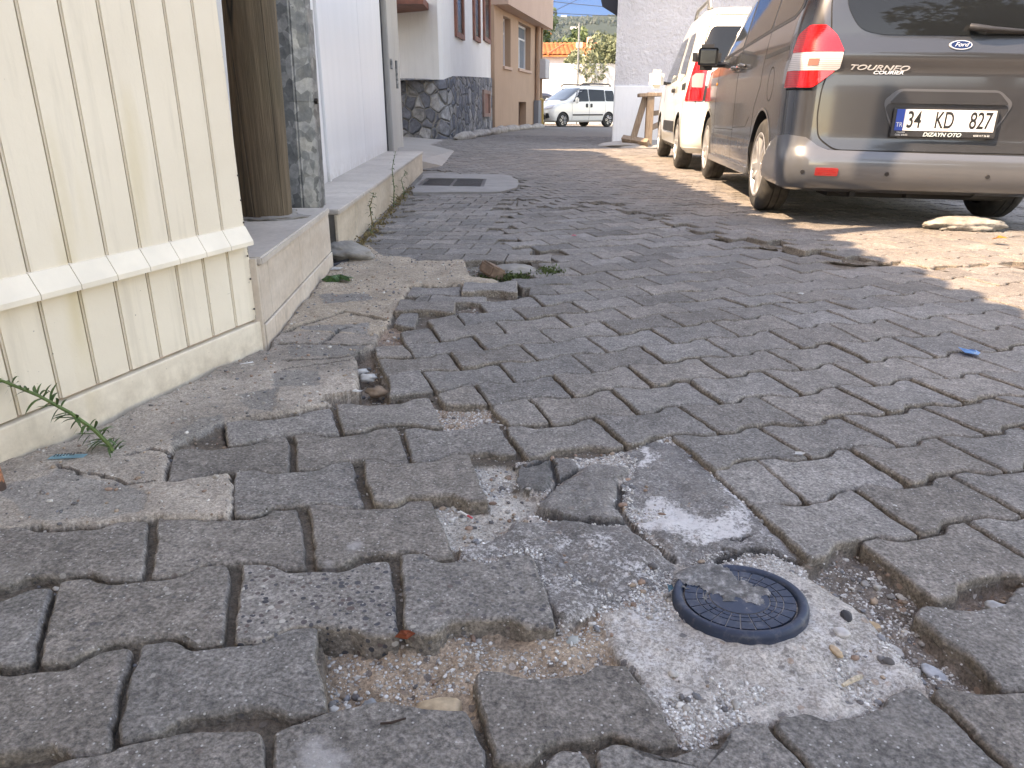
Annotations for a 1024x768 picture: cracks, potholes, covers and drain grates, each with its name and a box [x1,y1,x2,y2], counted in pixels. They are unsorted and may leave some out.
drain grate [412,172,520,196]
manhole cover [672,563,810,645]
crack [57,446,173,485]
crack [277,311,388,369]
pothole [437,464,545,552]
pothole [323,349,434,409]
pothole [325,614,625,733]
